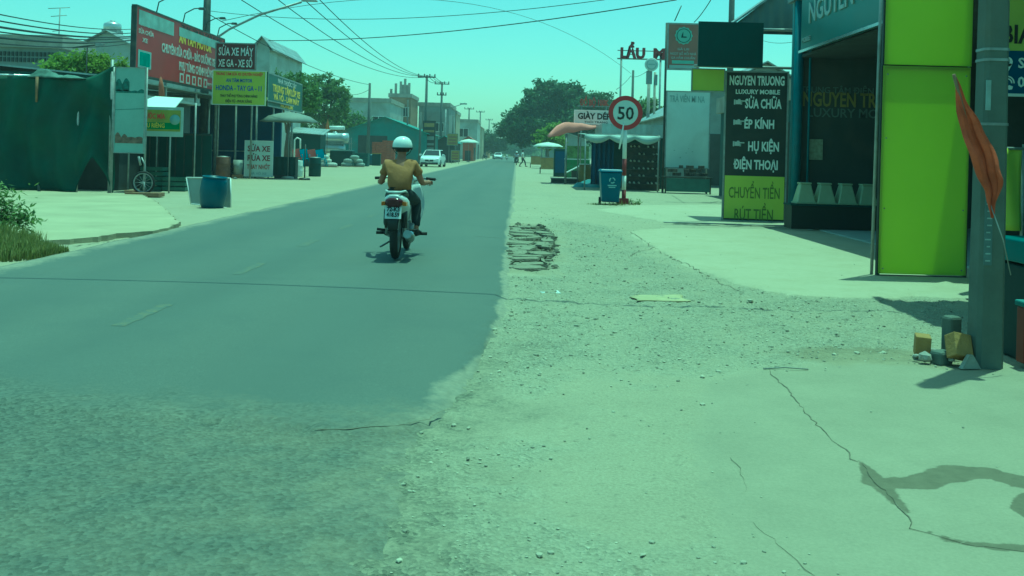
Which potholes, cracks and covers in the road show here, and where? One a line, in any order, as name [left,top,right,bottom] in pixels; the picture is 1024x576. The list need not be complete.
crack [770,372,1024,552]
crack [321,410,444,430]
pothole [505,222,561,272]
